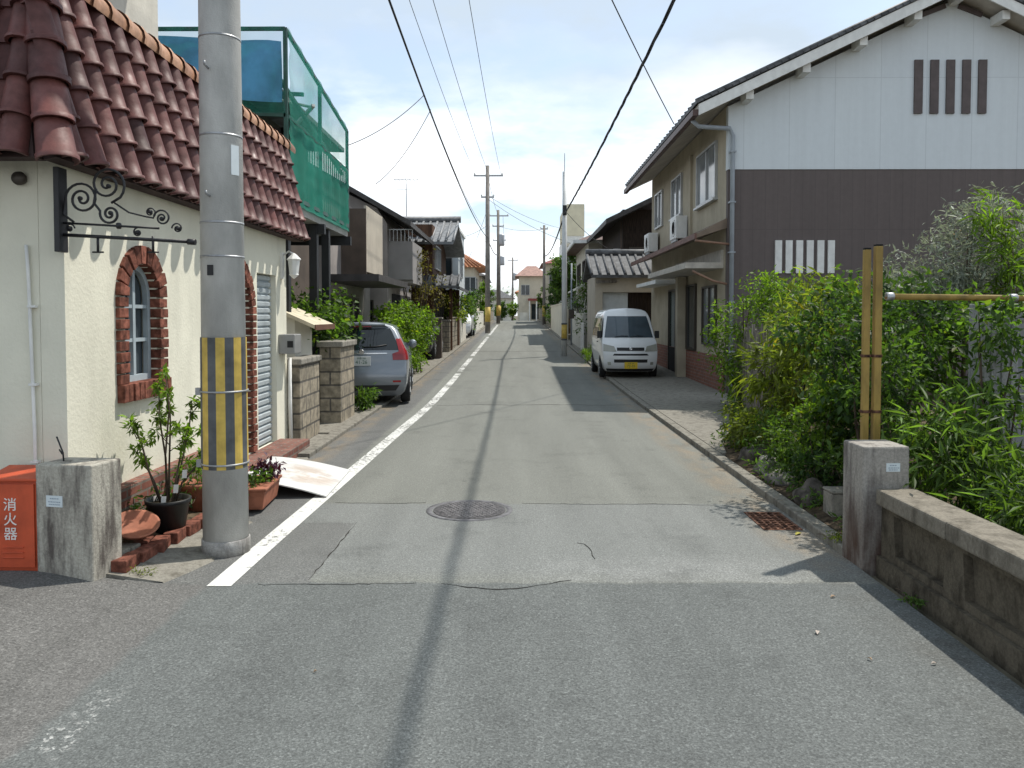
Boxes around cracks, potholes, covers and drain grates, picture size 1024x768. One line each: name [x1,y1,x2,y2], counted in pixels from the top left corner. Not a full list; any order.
manhole cover [426,500,513,521]
drain grate [744,512,803,530]
